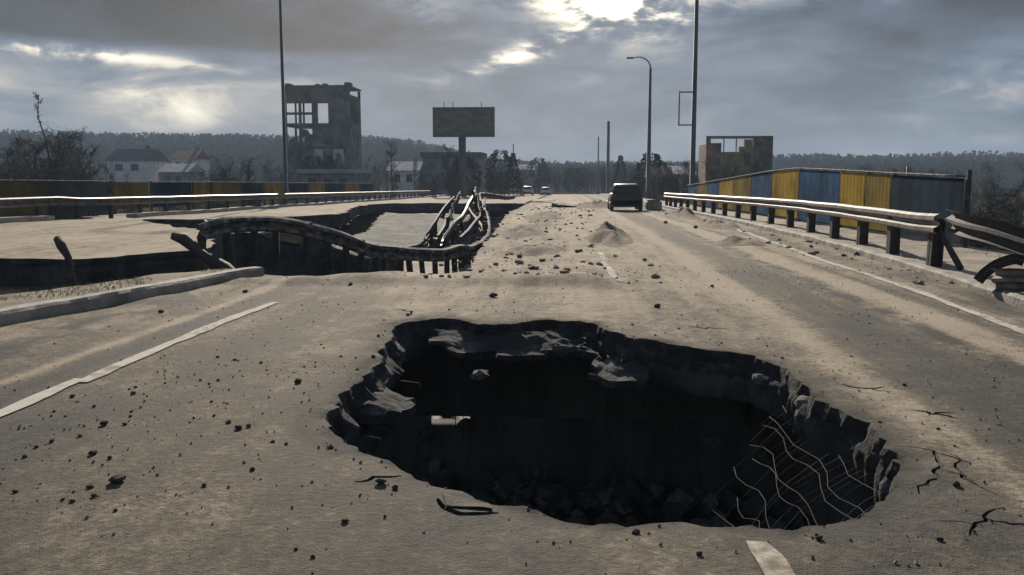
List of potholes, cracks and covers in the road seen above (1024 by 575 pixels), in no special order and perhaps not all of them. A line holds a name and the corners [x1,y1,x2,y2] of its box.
crack [914,410,953,418]
pothole [325,318,903,530]
crack [843,384,891,392]
crack [901,446,1024,535]
